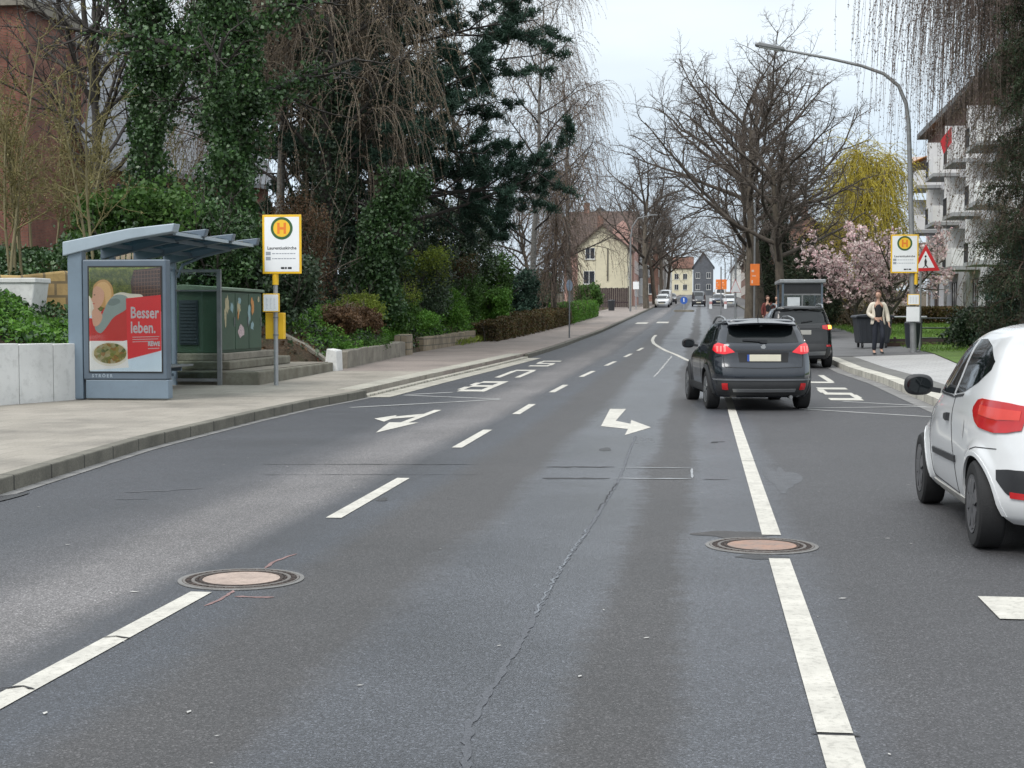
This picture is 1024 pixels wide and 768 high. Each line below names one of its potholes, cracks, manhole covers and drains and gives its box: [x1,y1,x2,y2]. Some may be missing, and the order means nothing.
crack [545,466,617,511]
manhole cover [705,537,819,555]
manhole cover [178,568,305,591]
